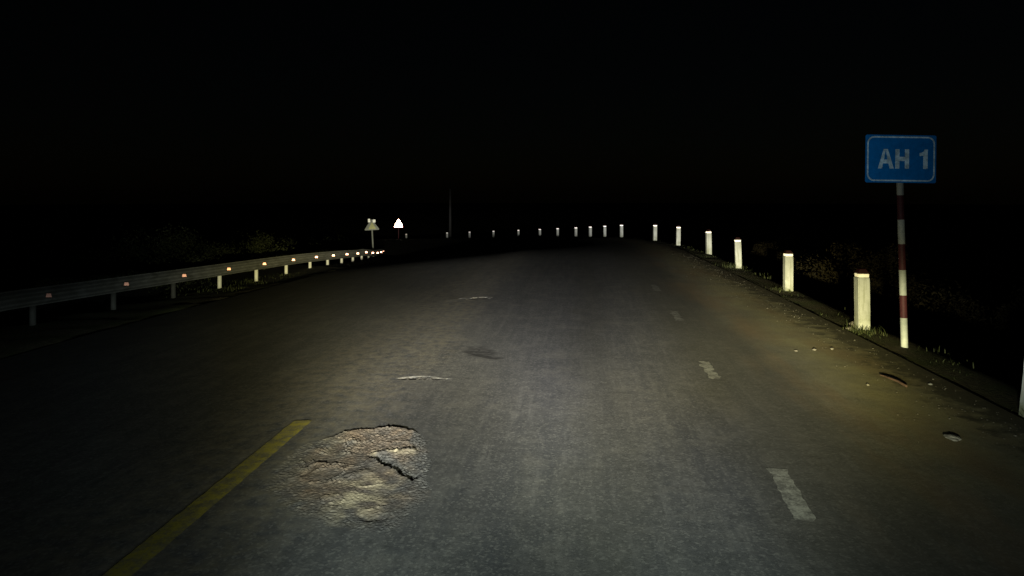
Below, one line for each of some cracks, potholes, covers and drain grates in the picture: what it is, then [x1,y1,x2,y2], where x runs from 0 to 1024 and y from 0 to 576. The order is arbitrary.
pothole [263,426,432,534]
